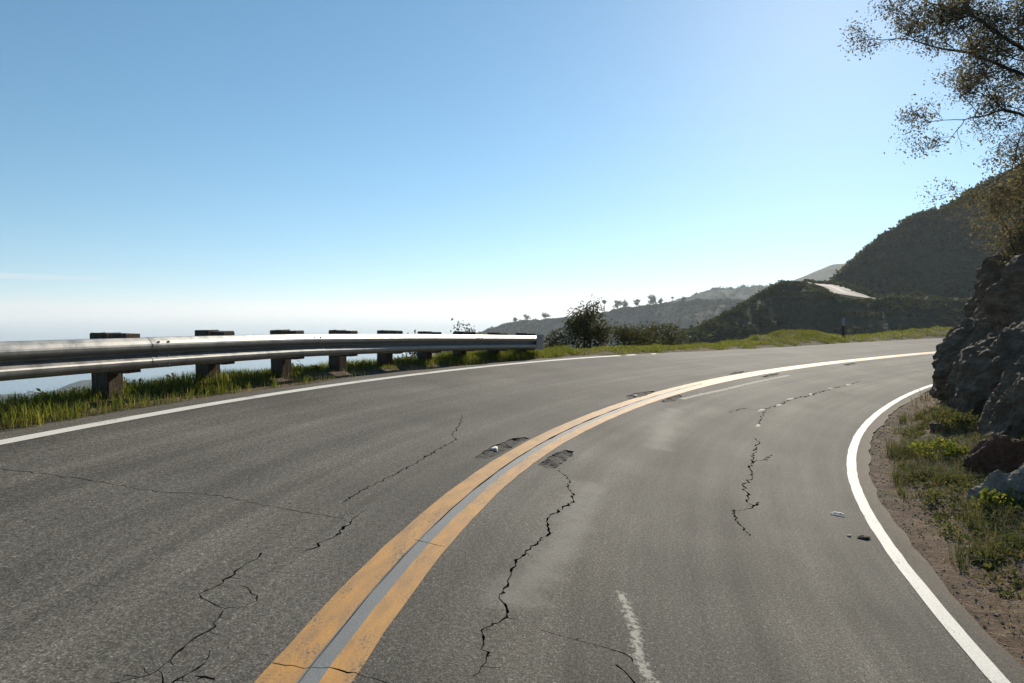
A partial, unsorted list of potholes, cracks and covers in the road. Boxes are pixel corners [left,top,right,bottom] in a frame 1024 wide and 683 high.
pothole [626,391,654,399]
pothole [475,437,529,459]
crack [112,553,262,683]
crack [473,470,640,683]
crack [3,416,463,552]
pothole [539,450,574,468]
crack [730,381,859,536]
